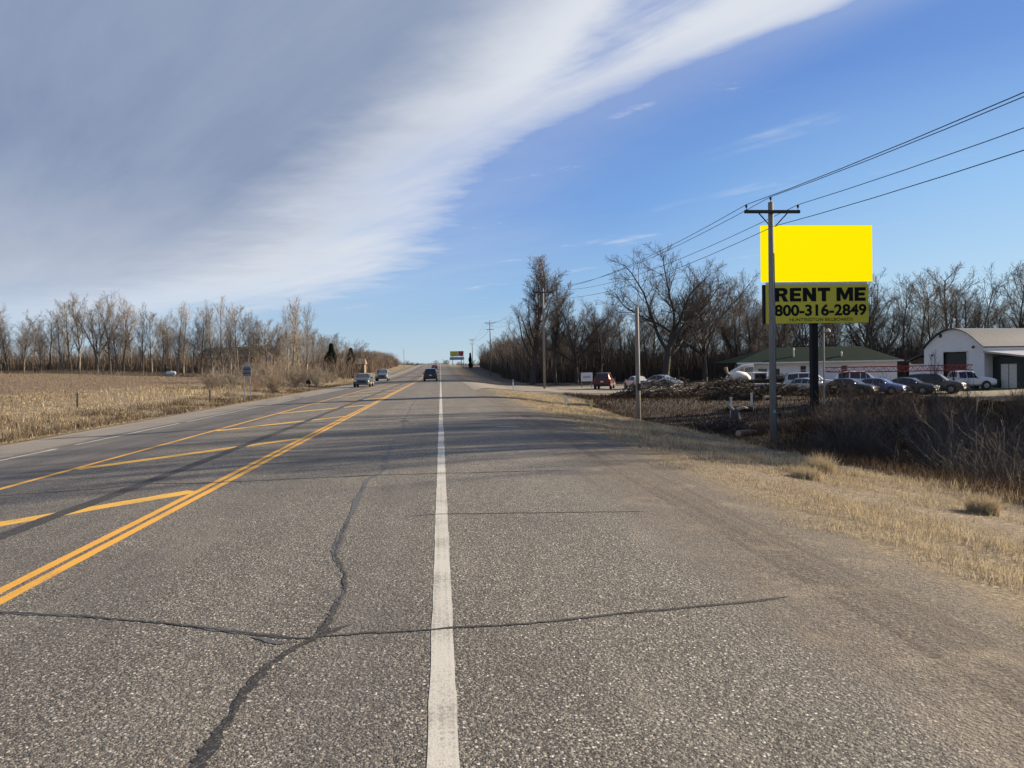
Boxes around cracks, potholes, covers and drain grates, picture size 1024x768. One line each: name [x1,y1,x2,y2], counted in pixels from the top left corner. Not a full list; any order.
crack [0,596,788,644]
